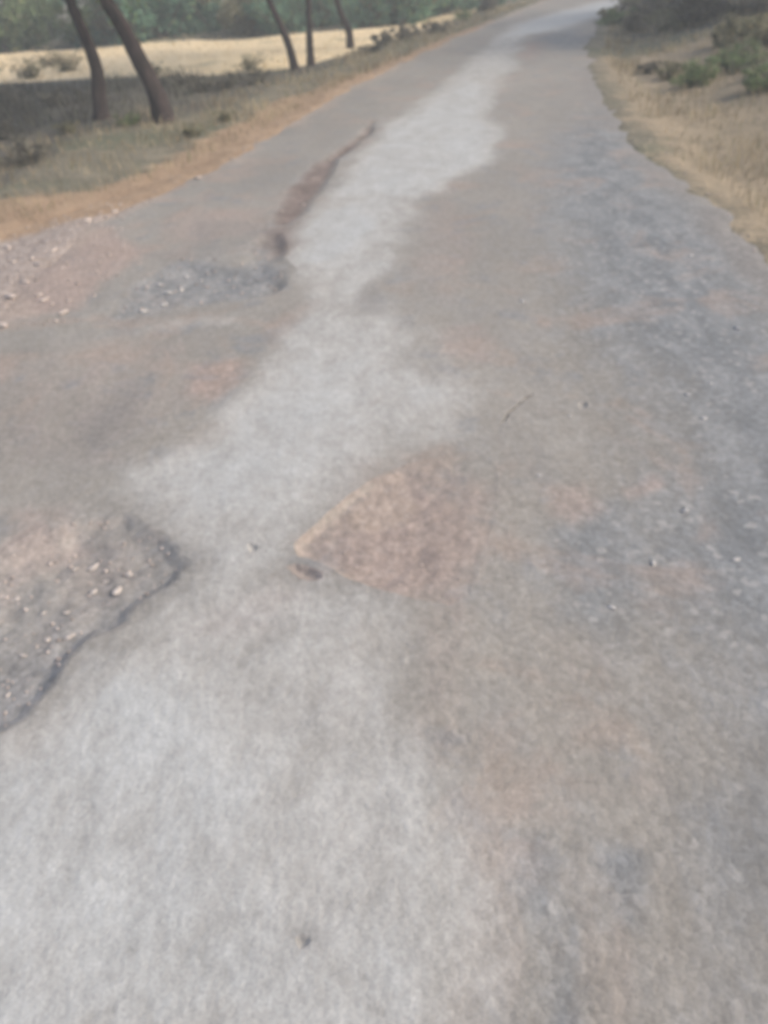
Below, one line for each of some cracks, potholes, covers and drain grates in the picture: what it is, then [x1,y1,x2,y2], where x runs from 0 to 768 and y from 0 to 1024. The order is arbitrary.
pothole [286,563,324,581]
pothole [0,508,193,735]
pothole [78,230,298,331]
